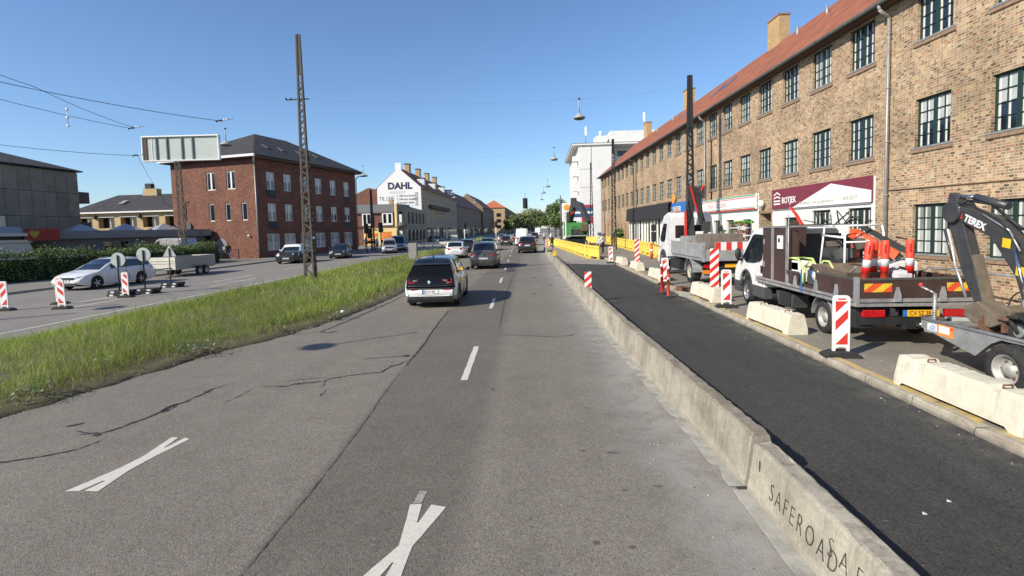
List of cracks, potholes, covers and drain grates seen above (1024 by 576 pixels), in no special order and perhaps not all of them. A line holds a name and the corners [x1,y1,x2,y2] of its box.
crack [279,355,410,395]
crack [0,422,106,463]
